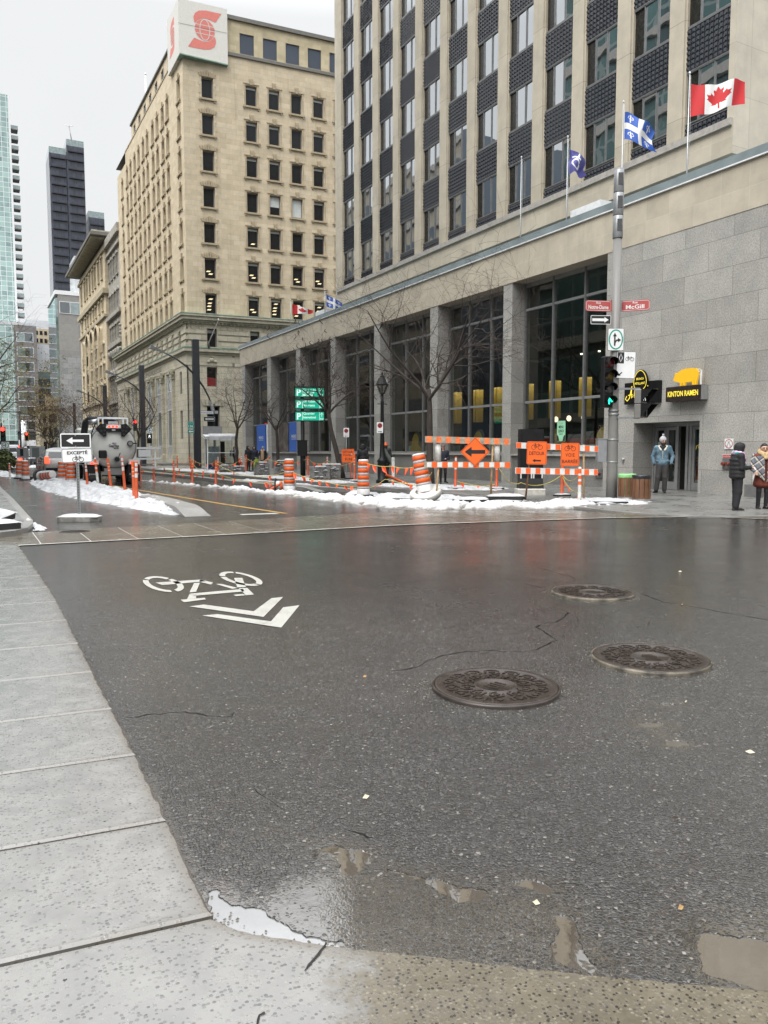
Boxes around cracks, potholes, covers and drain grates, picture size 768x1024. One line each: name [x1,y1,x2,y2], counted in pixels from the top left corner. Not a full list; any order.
manhole cover [551,584,635,601]
pothole [510,879,554,894]
manhole cover [431,667,561,710]
crack [393,610,569,671]
pothole [387,869,487,904]
crack [643,594,766,620]
pothole [550,914,598,974]
manhole cover [590,642,713,677]
pothole [321,844,374,876]
pothole [207,889,346,947]
pothole [693,931,768,990]
